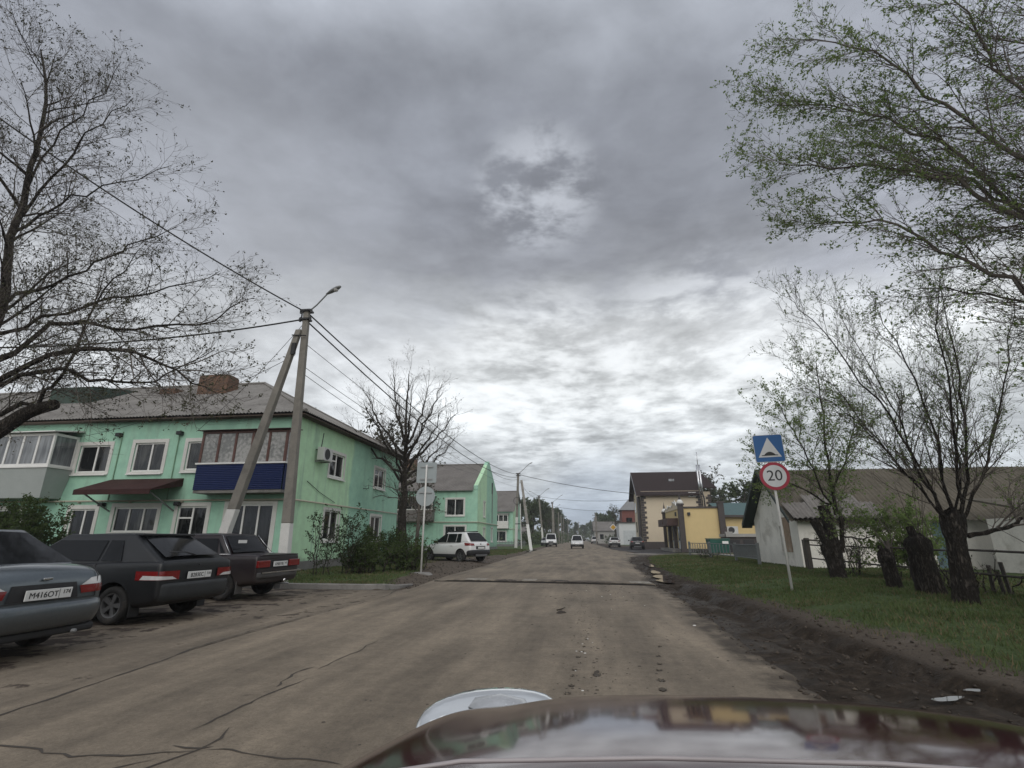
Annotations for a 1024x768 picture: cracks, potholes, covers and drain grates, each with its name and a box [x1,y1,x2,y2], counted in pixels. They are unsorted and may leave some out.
crack [0,640,378,768]
